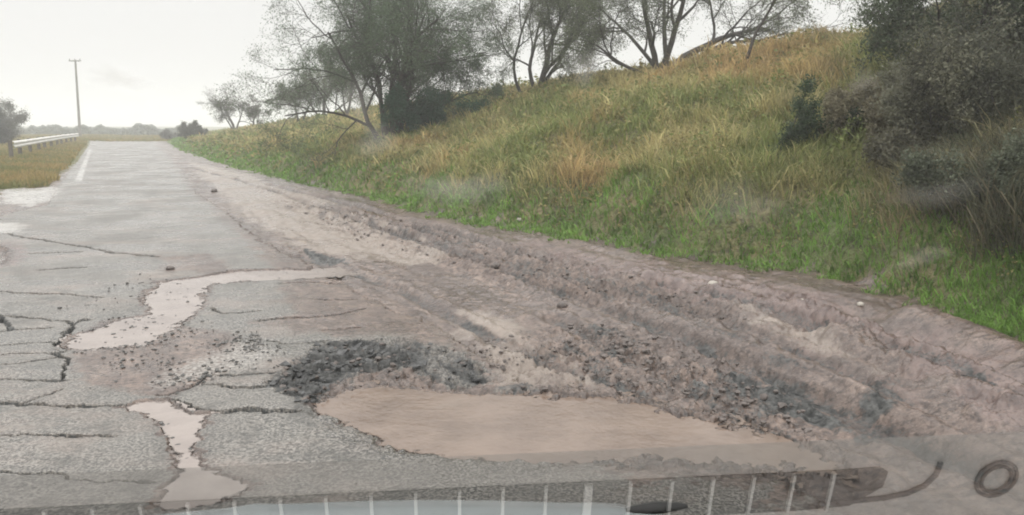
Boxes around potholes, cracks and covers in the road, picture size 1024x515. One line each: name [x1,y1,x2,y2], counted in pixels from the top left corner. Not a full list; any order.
crack [157,371,302,414]
crack [0,314,127,409]
crack [0,290,105,298]
pothole [112,397,264,493]
crack [4,233,160,271]
pothole [54,267,360,352]
pothole [264,337,839,470]
crack [0,470,159,484]
crack [212,281,367,344]
